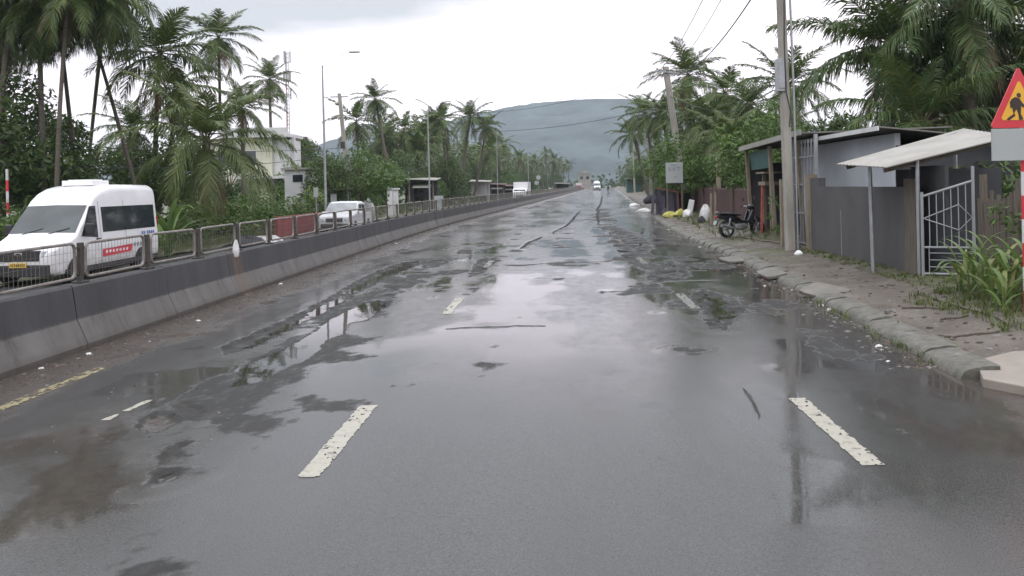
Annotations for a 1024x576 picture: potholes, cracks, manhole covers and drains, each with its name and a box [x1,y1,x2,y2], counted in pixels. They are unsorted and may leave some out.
crack [743,388,761,419]
pothole [97,406,216,443]
